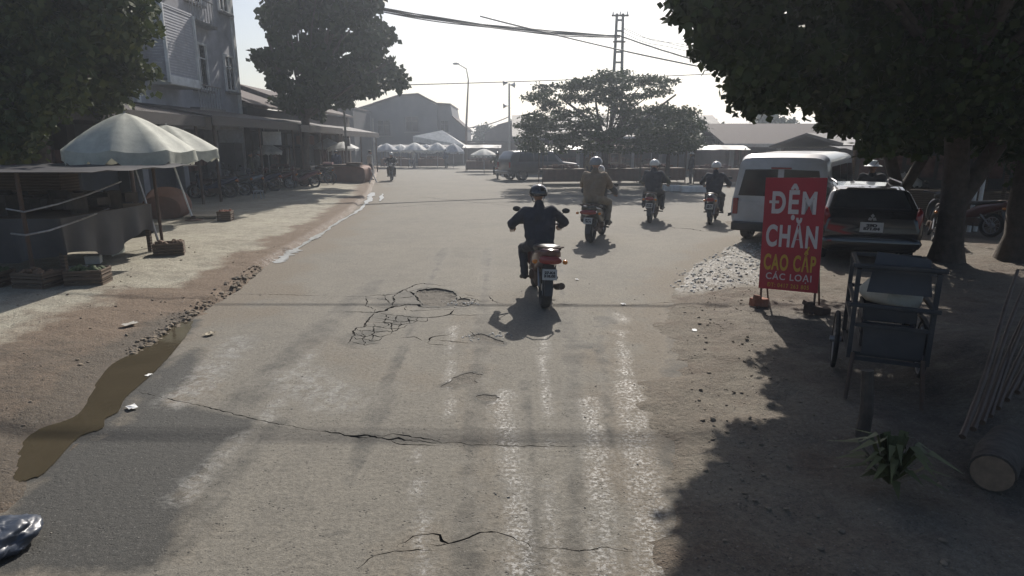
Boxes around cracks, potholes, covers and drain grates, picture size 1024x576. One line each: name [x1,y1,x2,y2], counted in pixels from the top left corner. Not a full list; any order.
crack [228,283,495,346]
crack [143,393,566,447]
crack [360,531,626,567]
pothole [416,288,457,307]
pothole [441,372,483,389]
